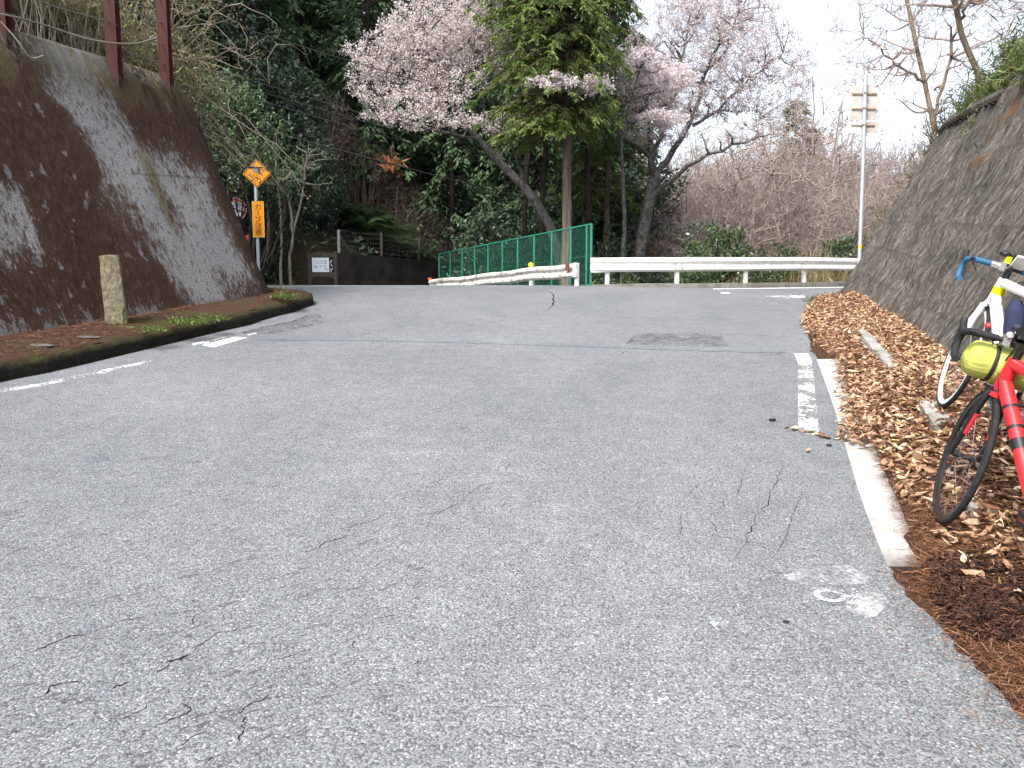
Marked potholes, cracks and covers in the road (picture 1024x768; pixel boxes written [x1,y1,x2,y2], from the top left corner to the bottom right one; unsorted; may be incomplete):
crack [112,600,293,766]
crack [3,630,99,703]
crack [712,476,803,573]
